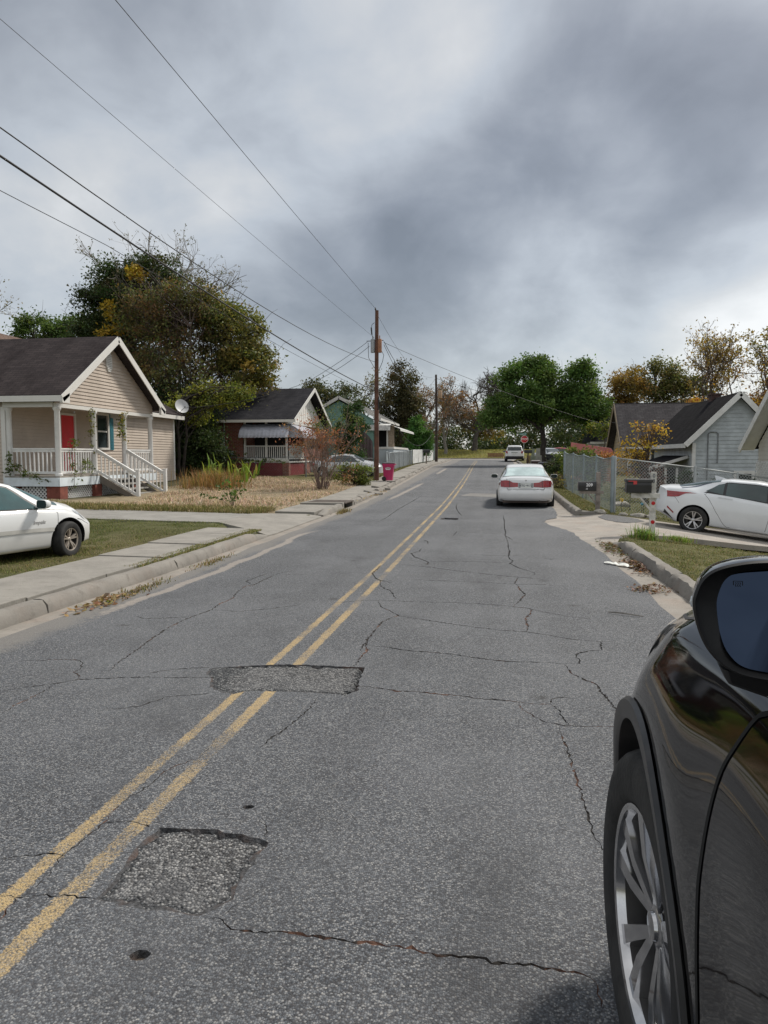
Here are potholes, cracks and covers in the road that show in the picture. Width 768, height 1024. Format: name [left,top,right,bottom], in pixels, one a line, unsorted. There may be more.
crack [218,884,603,1007]
crack [259,698,317,749]
crack [350,516,616,850]
crack [0,571,303,715]
crack [0,747,209,920]
pothole [96,828,269,916]
pothole [129,950,151,961]
